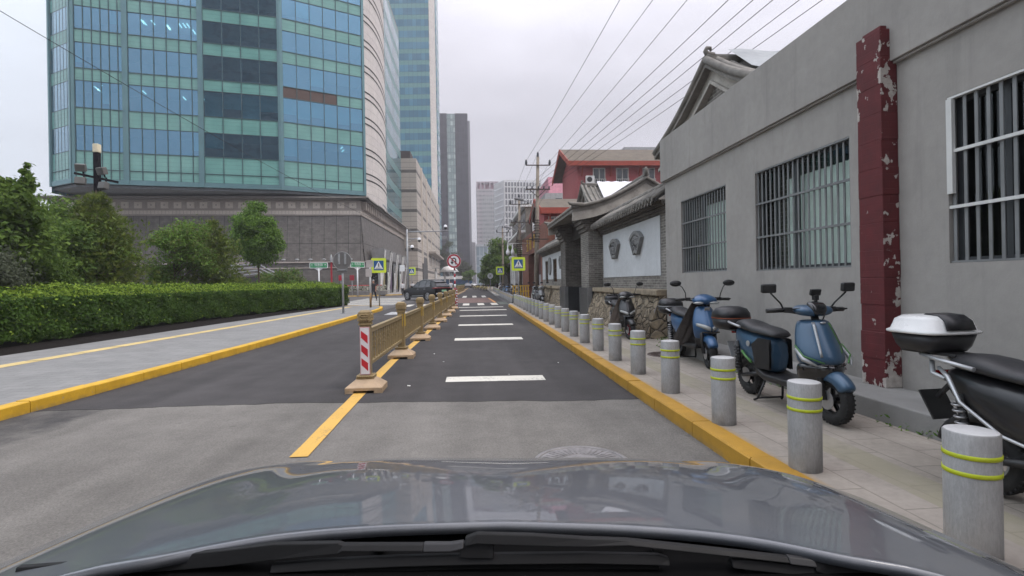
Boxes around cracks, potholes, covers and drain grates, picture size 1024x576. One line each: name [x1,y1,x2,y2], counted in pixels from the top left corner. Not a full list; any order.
manhole cover [535,446,627,458]
